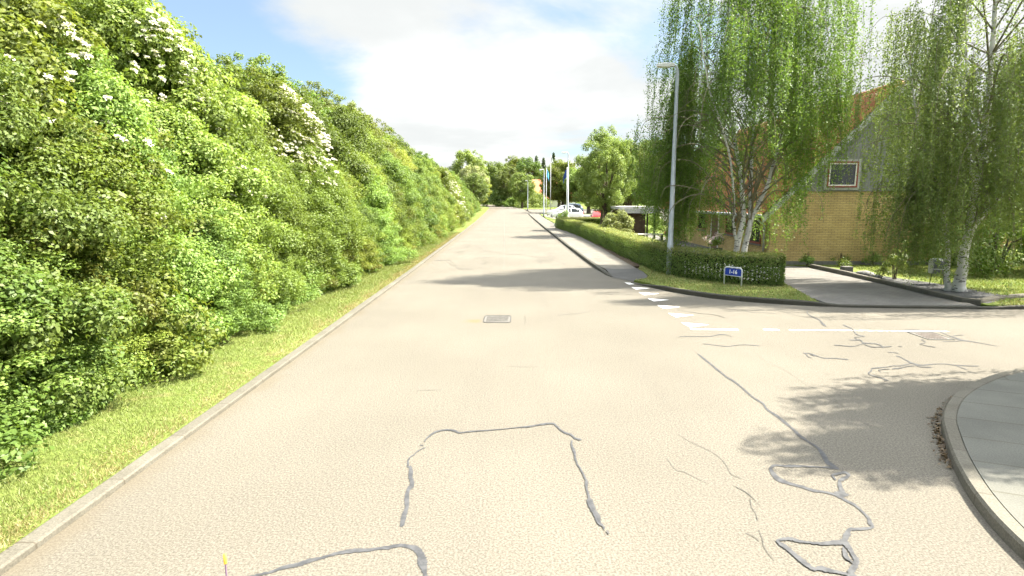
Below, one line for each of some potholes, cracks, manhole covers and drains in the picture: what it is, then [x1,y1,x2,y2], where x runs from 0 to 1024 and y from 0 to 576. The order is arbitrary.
manhole cover [907,332,955,340]
manhole cover [483,315,511,323]
crack [683,437,773,558]
